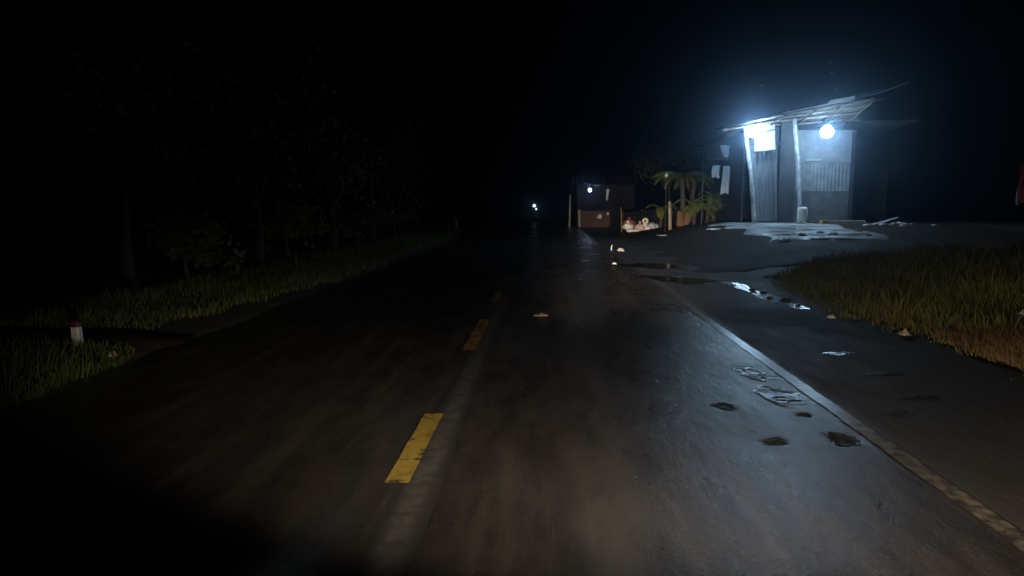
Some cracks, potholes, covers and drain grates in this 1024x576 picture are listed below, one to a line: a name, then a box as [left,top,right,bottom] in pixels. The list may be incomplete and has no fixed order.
pothole [734,367,767,381]
pothole [754,385,802,406]
pothole [828,431,861,445]
pothole [710,402,737,410]
